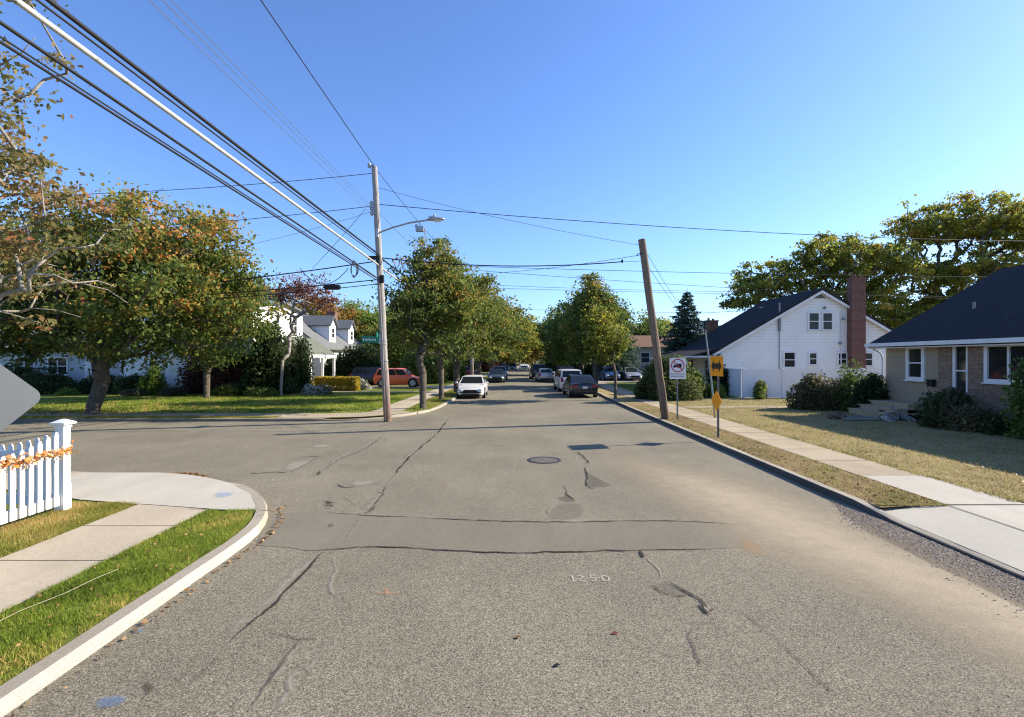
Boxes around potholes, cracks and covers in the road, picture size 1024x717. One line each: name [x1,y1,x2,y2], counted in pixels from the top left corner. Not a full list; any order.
crack [240,546,682,687]
crack [327,420,734,525]
